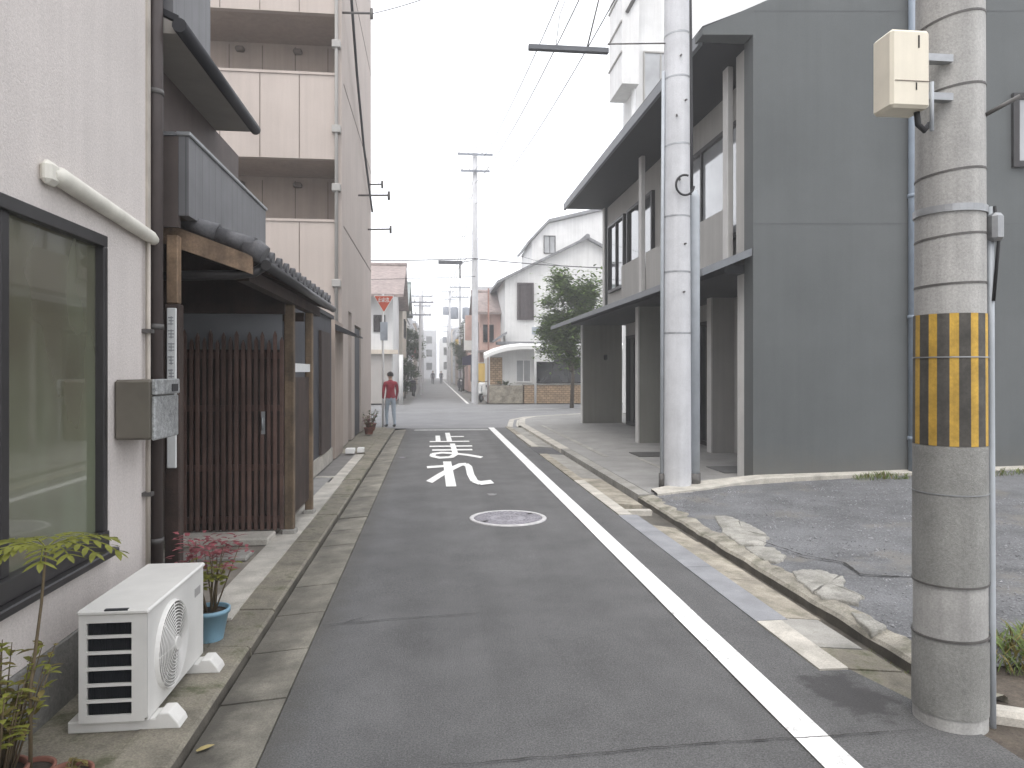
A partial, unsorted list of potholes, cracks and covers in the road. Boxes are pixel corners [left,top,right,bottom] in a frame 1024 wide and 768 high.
manhole cover [469,510,546,527]
crack [760,540,911,577]
